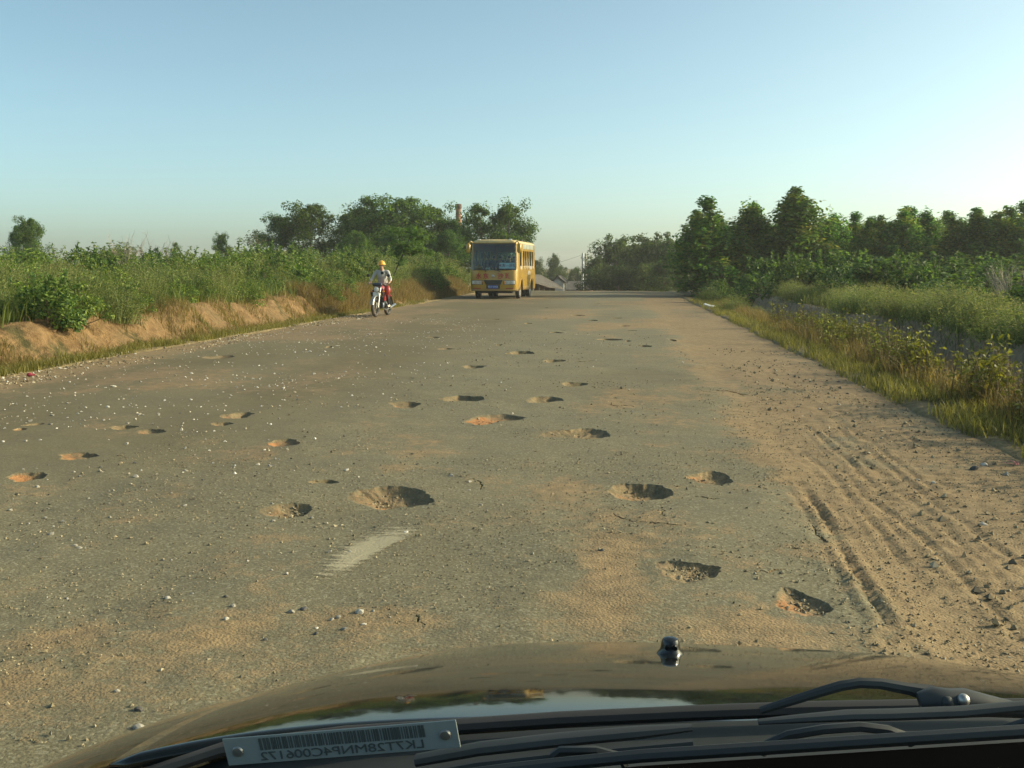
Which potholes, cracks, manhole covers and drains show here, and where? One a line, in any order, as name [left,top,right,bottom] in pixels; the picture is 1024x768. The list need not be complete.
pothole [463,414,526,425]
pothole [538,428,610,439]
pothole [265,439,300,447]
pothole [654,560,721,583]
pothole [607,483,674,501]
pothole [257,502,313,518]
pothole [6,472,48,482]
pothole [683,471,733,485]
pothole [57,452,99,460]
pothole [347,486,435,510]
pothole [771,586,834,617]
